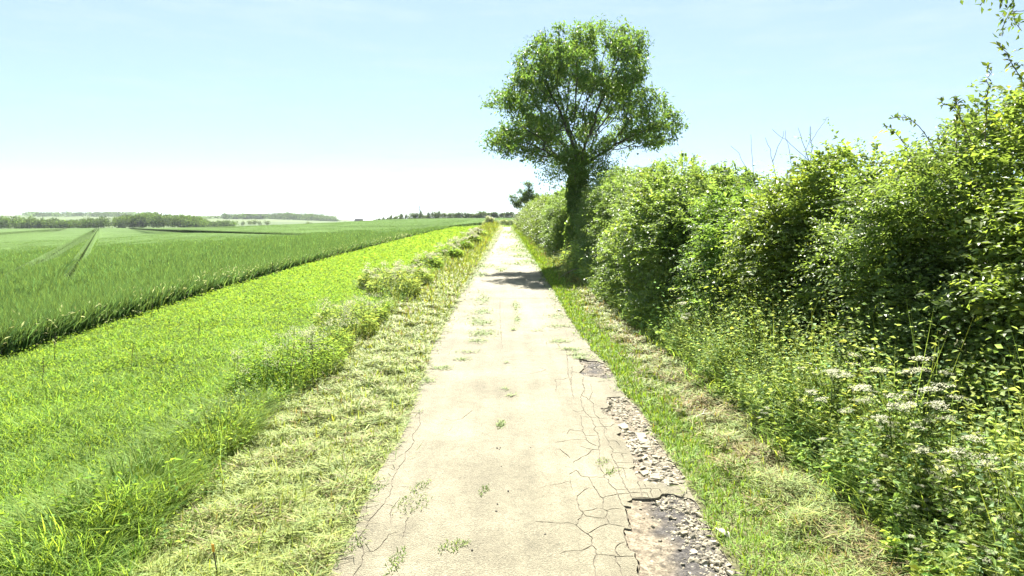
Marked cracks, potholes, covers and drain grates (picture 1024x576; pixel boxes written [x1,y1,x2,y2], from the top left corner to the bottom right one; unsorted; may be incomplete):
pothole [579,359,614,379]
pothole [624,493,740,576]
crack [536,352,662,576]
crack [351,412,421,576]
